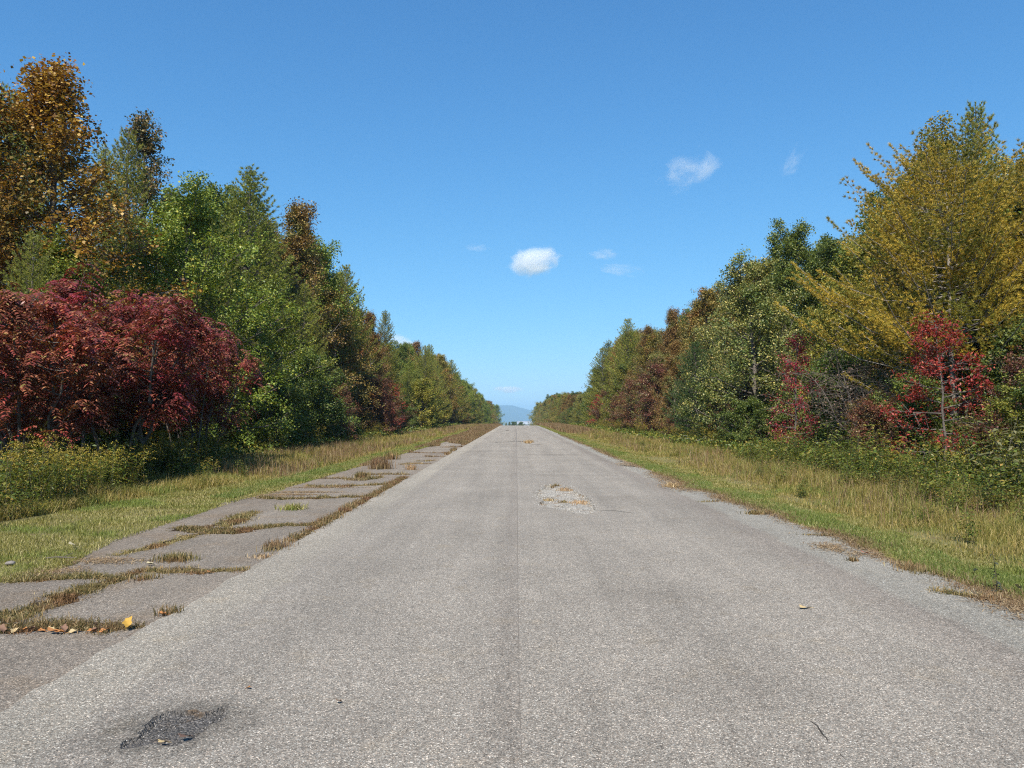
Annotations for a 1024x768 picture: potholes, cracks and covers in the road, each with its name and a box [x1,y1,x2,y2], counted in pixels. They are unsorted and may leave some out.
pothole [532,484,599,514]
crack [282,446,463,543]
